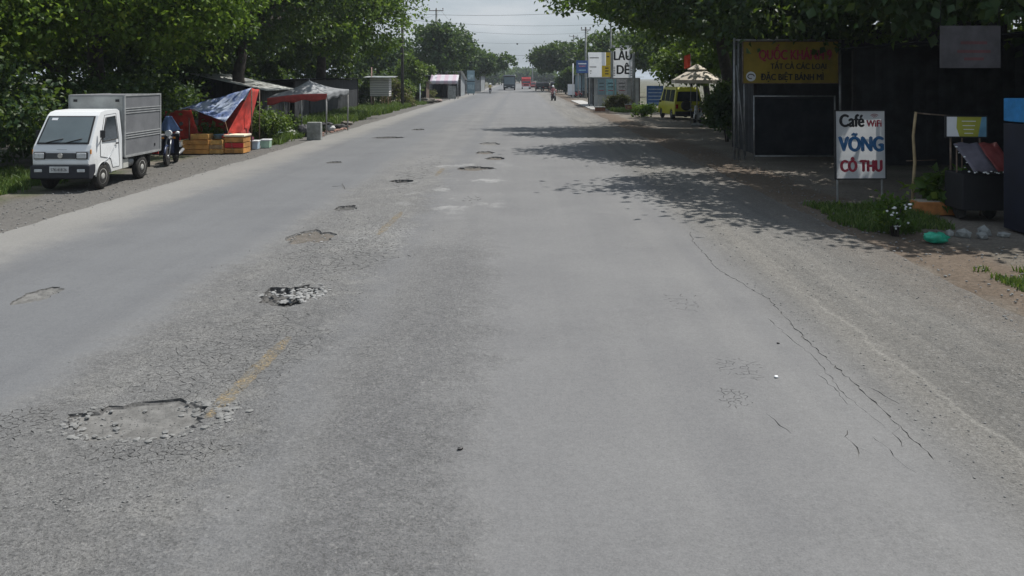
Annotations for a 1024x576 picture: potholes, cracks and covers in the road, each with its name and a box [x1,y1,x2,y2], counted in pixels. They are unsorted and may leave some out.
pothole [10,287,64,305]
crack [77,441,233,465]
crack [126,311,338,400]
crack [689,232,934,471]
crack [0,407,57,442]
pothole [285,228,337,244]
pothole [258,282,331,307]
pothole [46,398,254,445]
